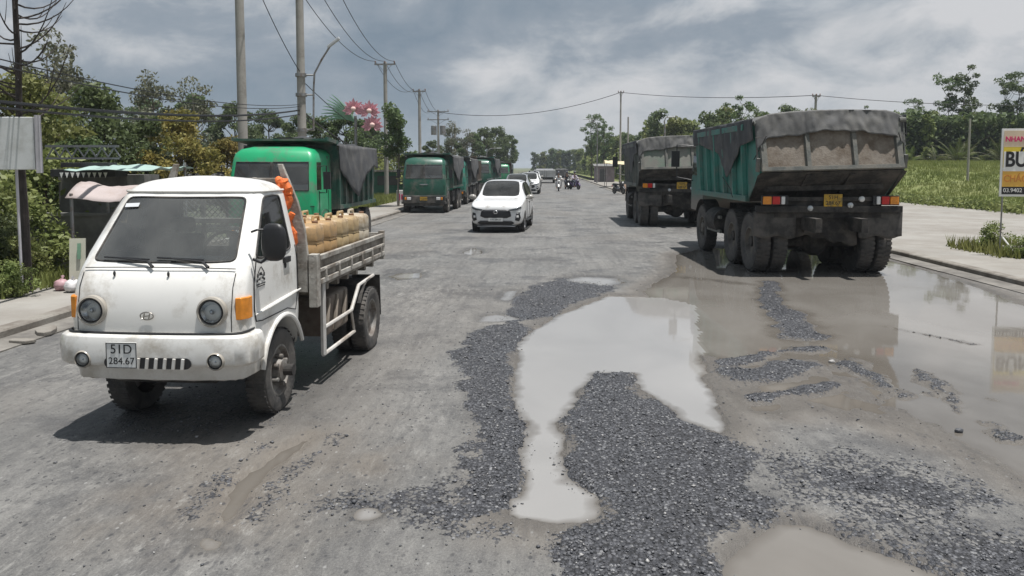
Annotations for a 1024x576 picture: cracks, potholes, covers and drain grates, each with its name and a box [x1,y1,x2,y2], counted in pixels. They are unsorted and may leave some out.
pothole [461,246,486,255]
pothole [475,313,525,322]
pothole [639,247,1024,481]
pothole [498,294,734,525]
pothole [384,271,426,281]
pothole [496,289,520,302]
pothole [207,433,323,525]
pothole [345,503,393,521]
pothole [562,275,629,286]
pothole [706,517,954,576]
